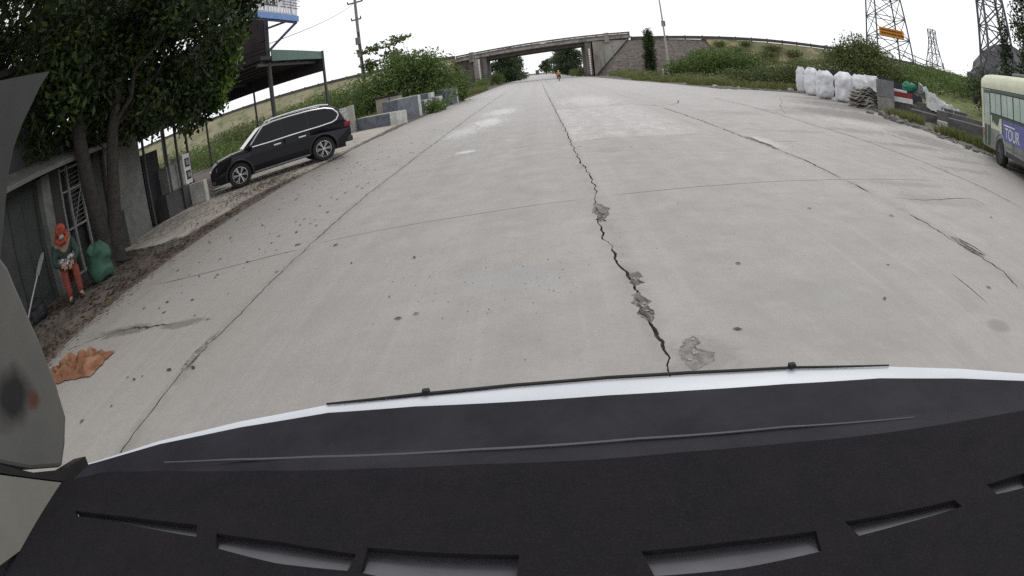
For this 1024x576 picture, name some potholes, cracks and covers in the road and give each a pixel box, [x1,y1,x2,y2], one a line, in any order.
crack [893,197,1017,302]
crack [717,98,999,196]
crack [325,84,940,372]
